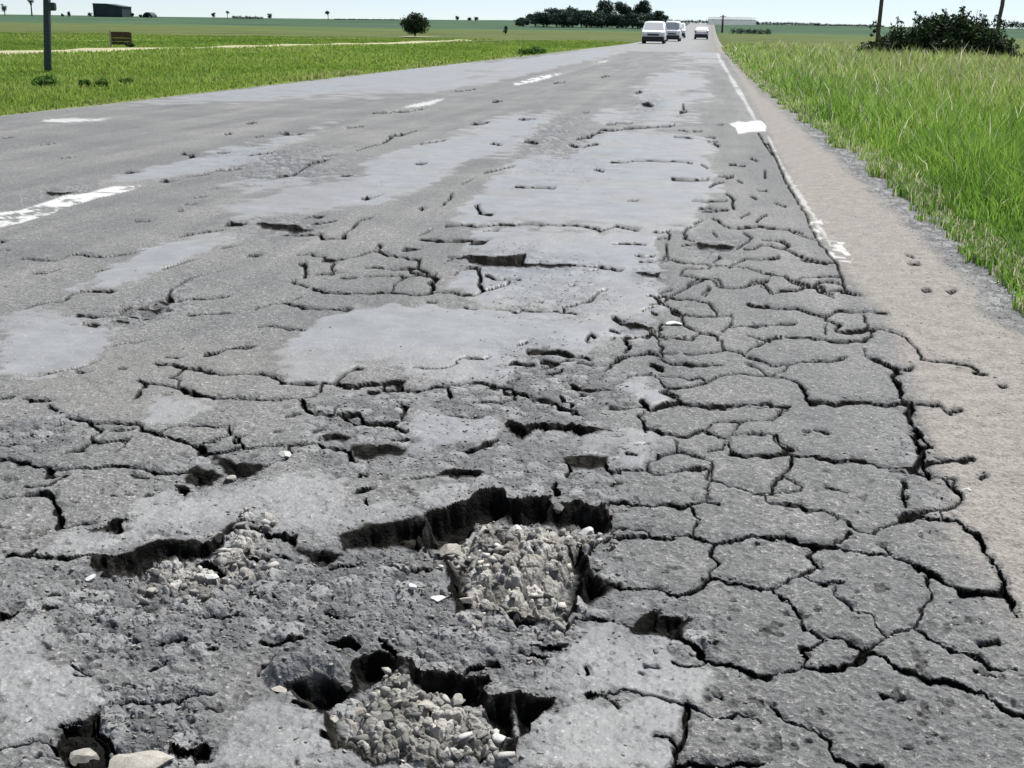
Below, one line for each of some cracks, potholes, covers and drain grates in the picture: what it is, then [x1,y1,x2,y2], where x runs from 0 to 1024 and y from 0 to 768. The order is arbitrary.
pothole [418,486,613,627]
crack [922,404,961,416]
crack [578,121,691,140]
crack [770,707,884,768]
crack [656,374,707,385]
crack [647,295,682,321]
crack [611,315,626,324]
crack [526,348,573,358]
crack [30,289,116,308]
crack [903,400,933,478]
crack [485,165,555,190]
